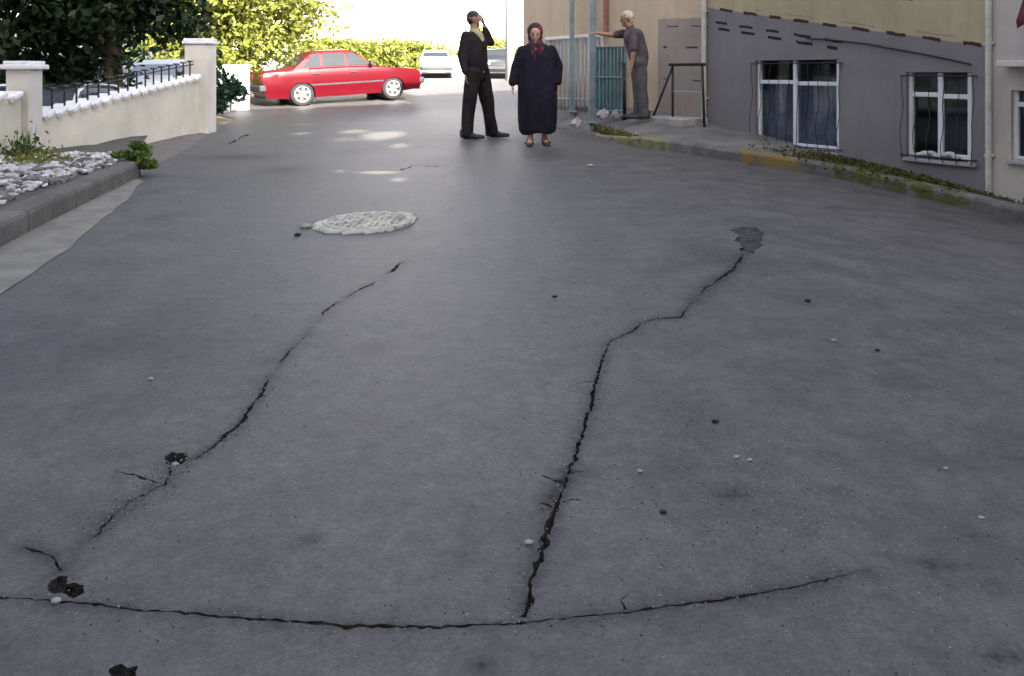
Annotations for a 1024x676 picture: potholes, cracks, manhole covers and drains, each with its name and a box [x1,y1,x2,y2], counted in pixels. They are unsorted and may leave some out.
crack [0,255,867,630]
manhole cover [310,211,418,235]
pothole [165,452,189,470]
pothole [108,664,138,676]
pothole [47,576,85,598]
pothole [730,226,764,254]
